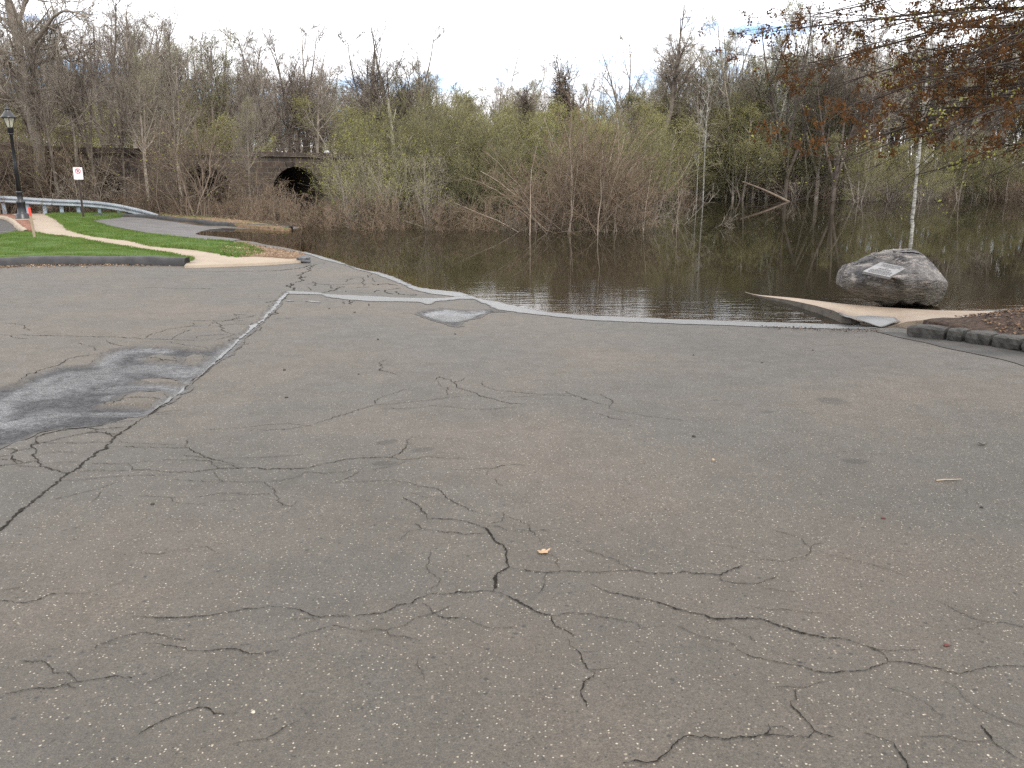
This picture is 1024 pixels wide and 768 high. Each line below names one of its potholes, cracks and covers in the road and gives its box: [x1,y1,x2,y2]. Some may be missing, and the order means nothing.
crack [2,580,125,603]
crack [218,360,687,430]
crack [96,470,776,706]
crack [0,314,444,506]
crack [139,700,224,734]
crack [4,660,181,694]
crack [163,264,417,305]
crack [716,528,898,573]
crack [863,681,1024,768]
crack [623,681,835,763]
crack [593,584,1015,716]
